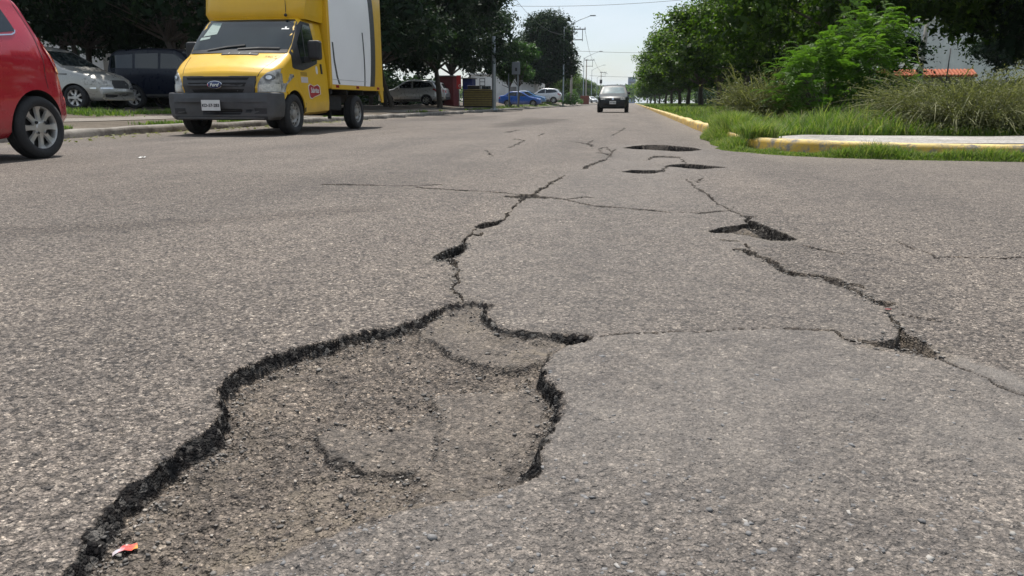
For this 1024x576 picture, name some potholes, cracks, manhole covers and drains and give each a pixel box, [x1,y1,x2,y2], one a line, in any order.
pothole [62,300,593,576]
crack [320,156,950,362]
crack [484,130,545,156]
pothole [709,221,796,241]
crack [576,128,625,169]
crack [896,241,1022,260]
